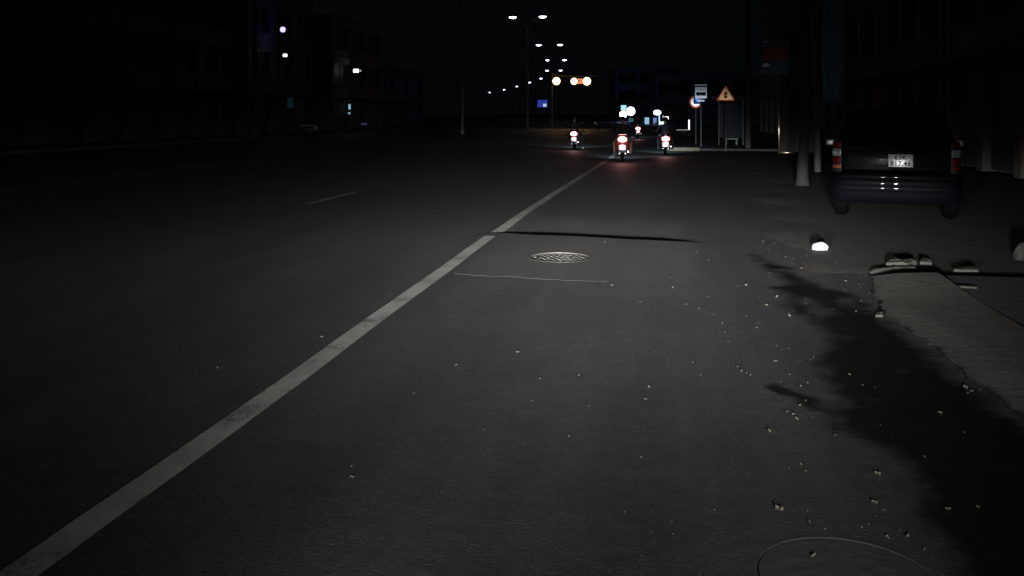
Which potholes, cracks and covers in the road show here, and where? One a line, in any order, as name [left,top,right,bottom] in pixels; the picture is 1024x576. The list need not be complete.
manhole cover [528,252,593,262]
manhole cover [752,535,938,576]
